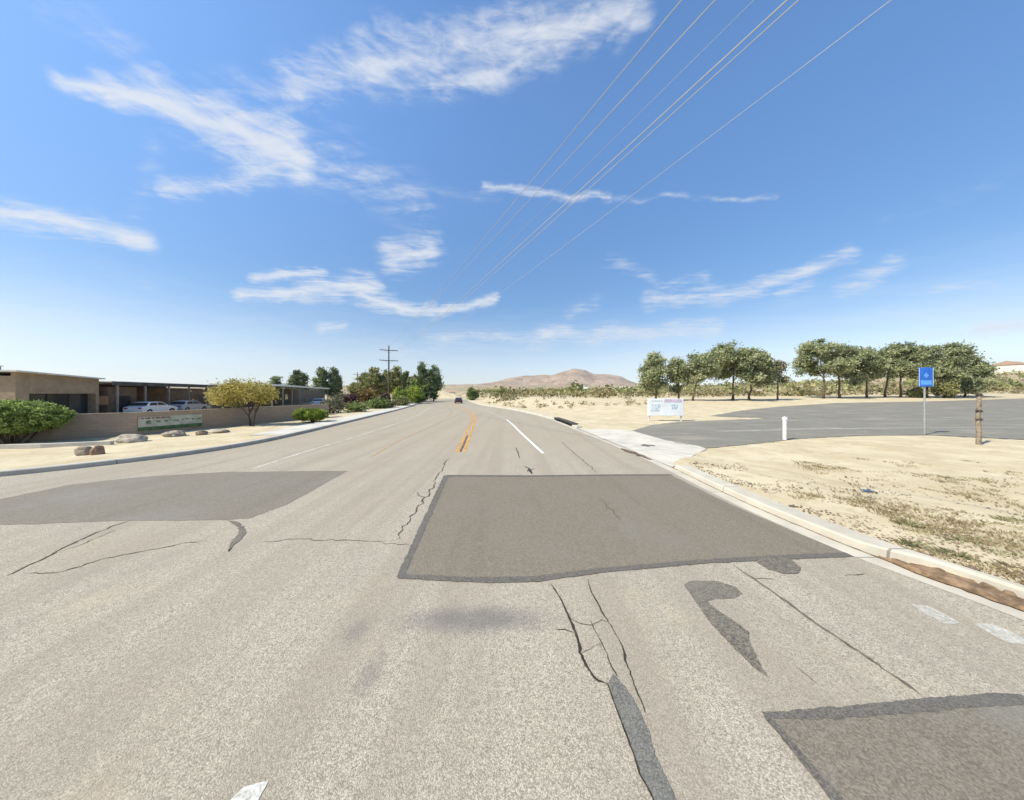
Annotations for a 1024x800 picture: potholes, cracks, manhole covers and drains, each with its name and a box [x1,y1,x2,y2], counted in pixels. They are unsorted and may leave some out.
crack [734,565,923,697]
crack [262,460,447,545]
crack [551,582,676,800]
crack [3,520,200,577]
